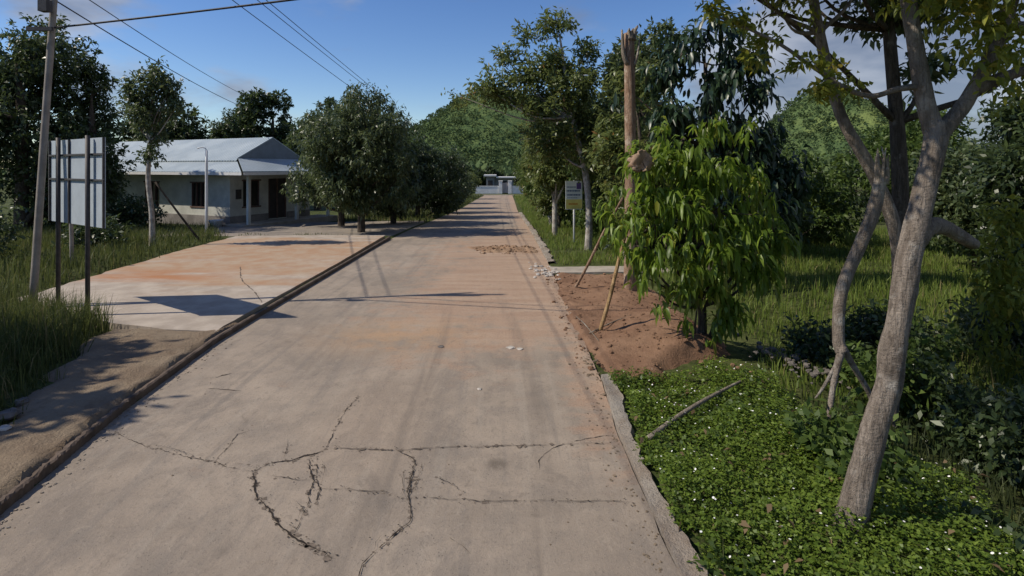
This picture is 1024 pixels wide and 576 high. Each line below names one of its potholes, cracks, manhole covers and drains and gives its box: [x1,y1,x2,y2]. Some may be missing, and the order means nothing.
crack [116,396,634,575]
